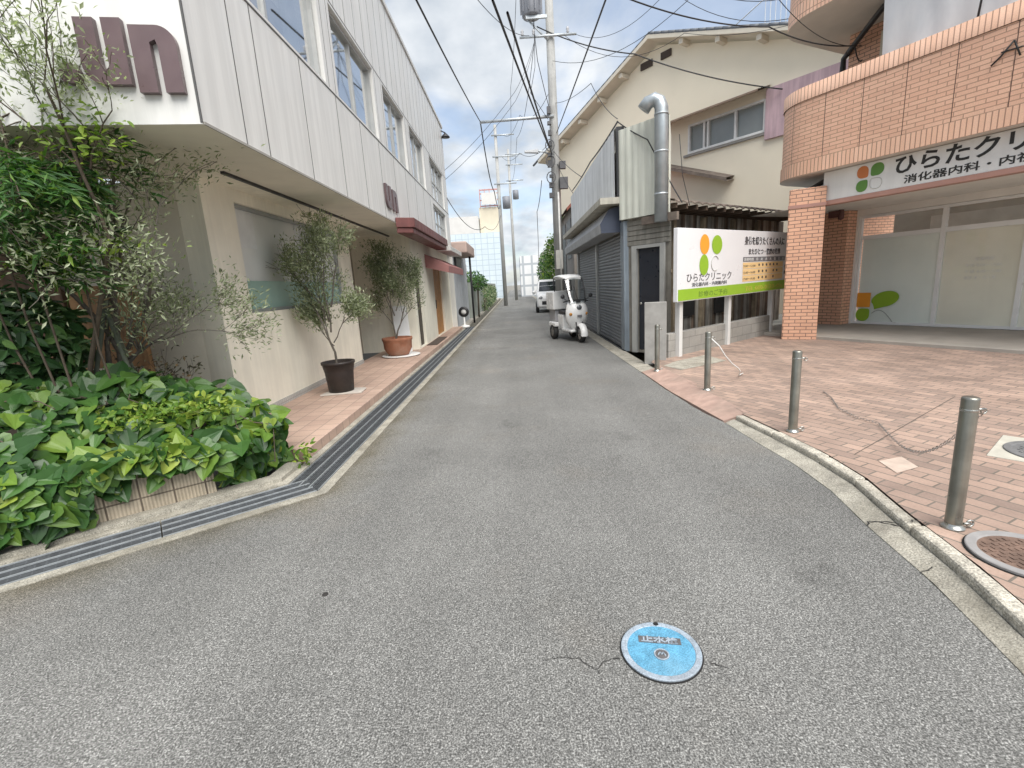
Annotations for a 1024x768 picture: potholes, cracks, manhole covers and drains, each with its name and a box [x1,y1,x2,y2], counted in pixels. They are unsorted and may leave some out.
manhole cover [620,622,704,684]
drain grate [161,480,317,537]
drain grate [361,400,405,421]
drain grate [401,374,430,386]
drain grate [329,420,386,450]
drain grate [424,357,446,366]
manhole cover [962,530,1024,578]
manhole cover [986,435,1024,462]
drain grate [413,365,438,375]
drain grate [284,448,359,491]
drain grate [384,385,419,401]
drain grate [0,521,162,586]
